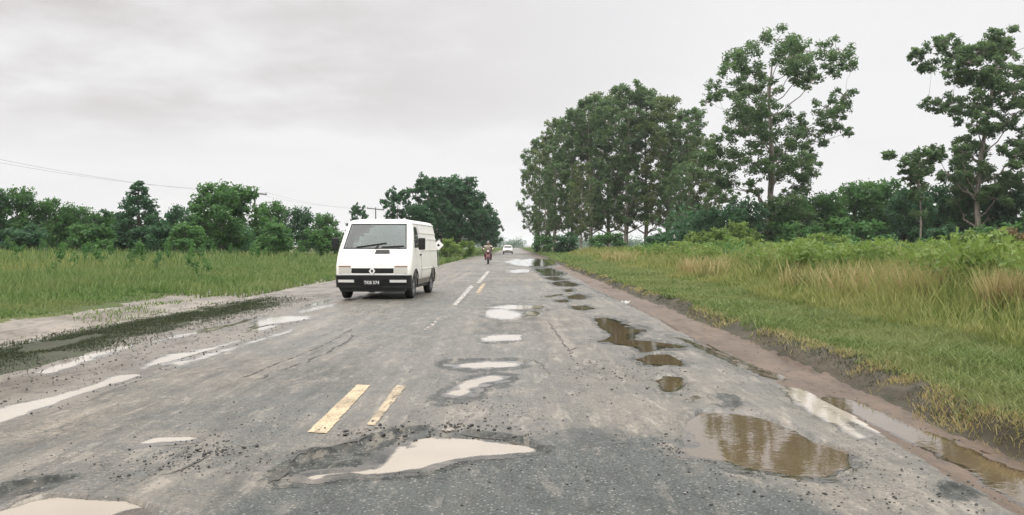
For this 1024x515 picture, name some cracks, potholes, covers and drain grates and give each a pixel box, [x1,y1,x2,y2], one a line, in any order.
pothole [548,280,586,288]
pothole [582,315,706,354]
pothole [473,302,555,321]
pothole [623,351,699,368]
pothole [530,267,570,277]
pothole [428,357,536,374]
crack [240,329,354,381]
pothole [642,372,702,398]
pothole [520,257,560,268]
pothole [420,372,525,407]
